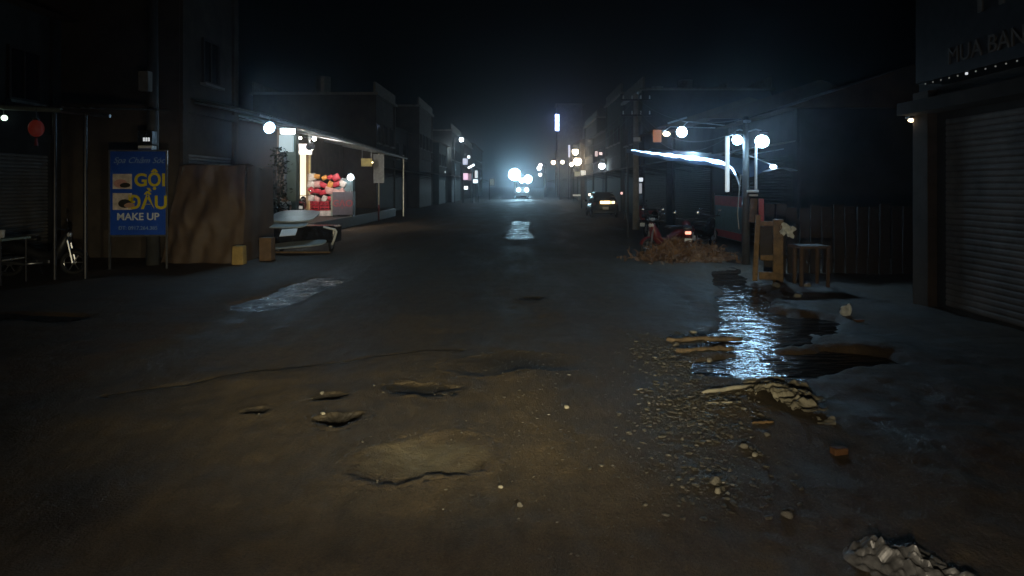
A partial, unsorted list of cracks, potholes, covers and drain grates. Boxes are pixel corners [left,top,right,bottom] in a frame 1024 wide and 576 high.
pothole [331,427,507,490]
crack [108,349,460,398]
pothole [230,404,278,417]
pothole [378,378,470,401]
pothole [303,390,358,404]
pothole [302,410,375,431]
pothole [434,348,593,379]
